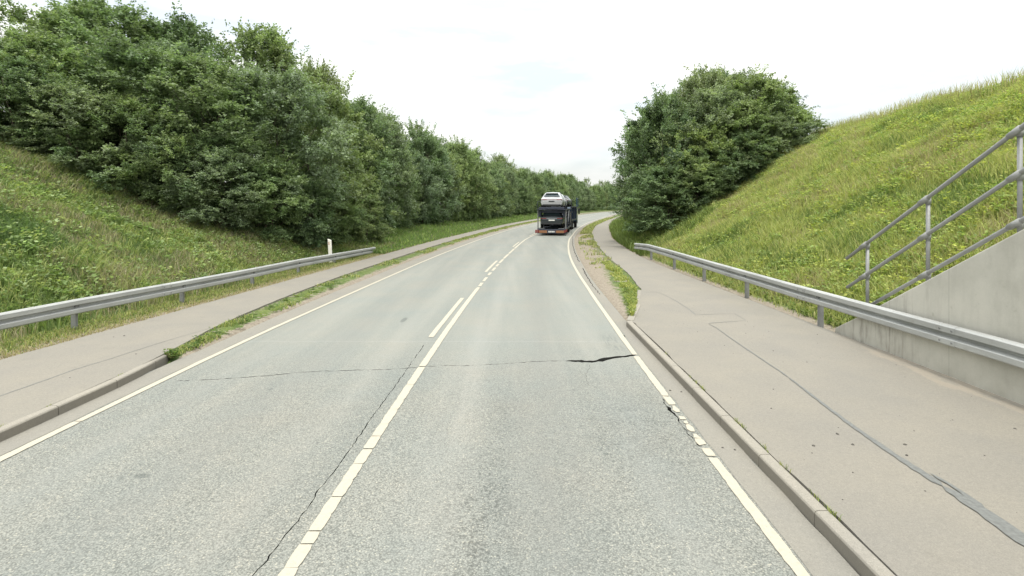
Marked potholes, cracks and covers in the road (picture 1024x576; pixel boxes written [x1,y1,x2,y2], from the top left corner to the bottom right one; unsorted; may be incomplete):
crack [185,345,541,576]
crack [662,398,699,446]
crack [568,354,635,382]
